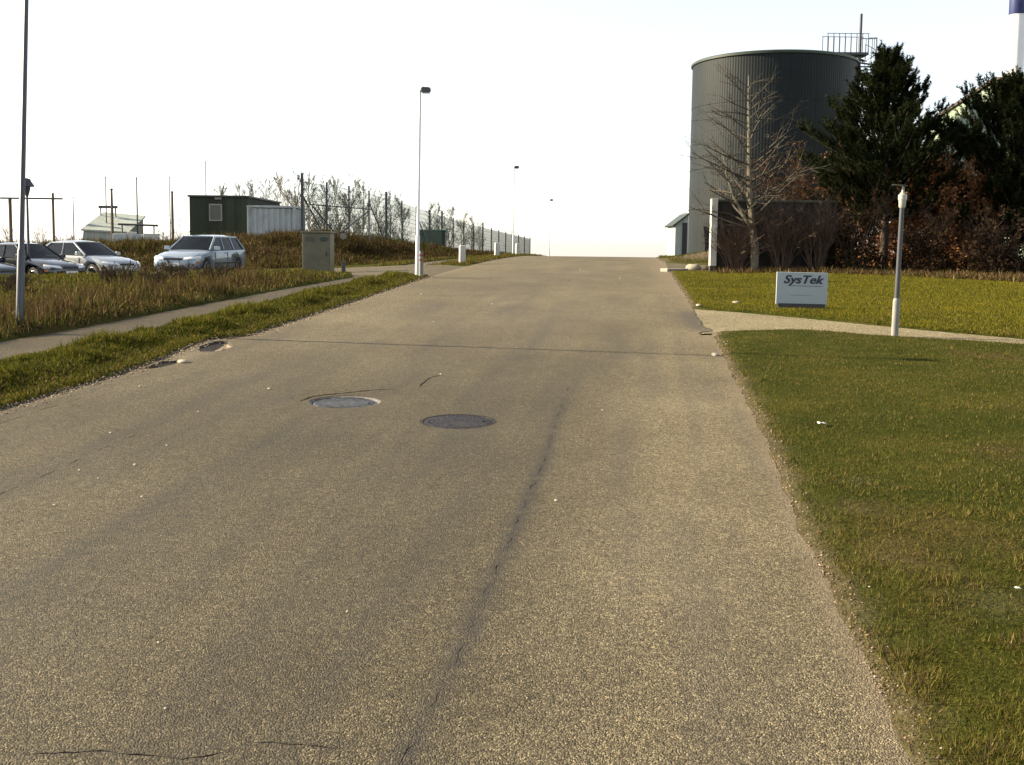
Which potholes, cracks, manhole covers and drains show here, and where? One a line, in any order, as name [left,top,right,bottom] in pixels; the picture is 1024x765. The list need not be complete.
pothole [198,341,233,352]
crack [399,388,569,765]
pothole [144,360,178,369]
crack [301,389,389,401]
manhole cover [309,396,381,408]
manhole cover [420,414,497,429]
crack [25,741,332,760]
